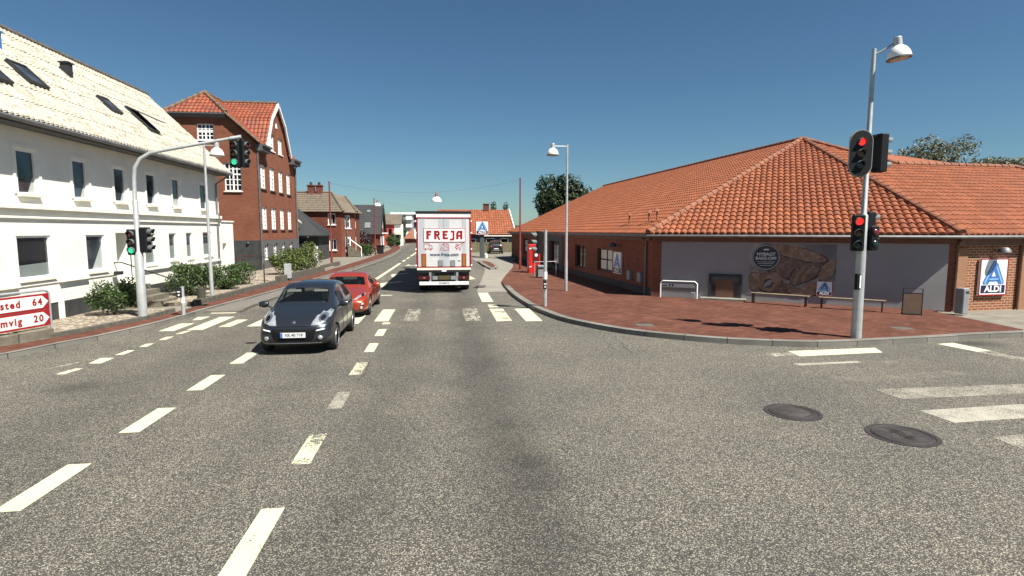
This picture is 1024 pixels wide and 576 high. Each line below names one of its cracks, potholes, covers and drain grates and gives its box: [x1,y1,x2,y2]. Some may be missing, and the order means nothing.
manhole cover [864,424,942,448]
manhole cover [763,404,823,421]
